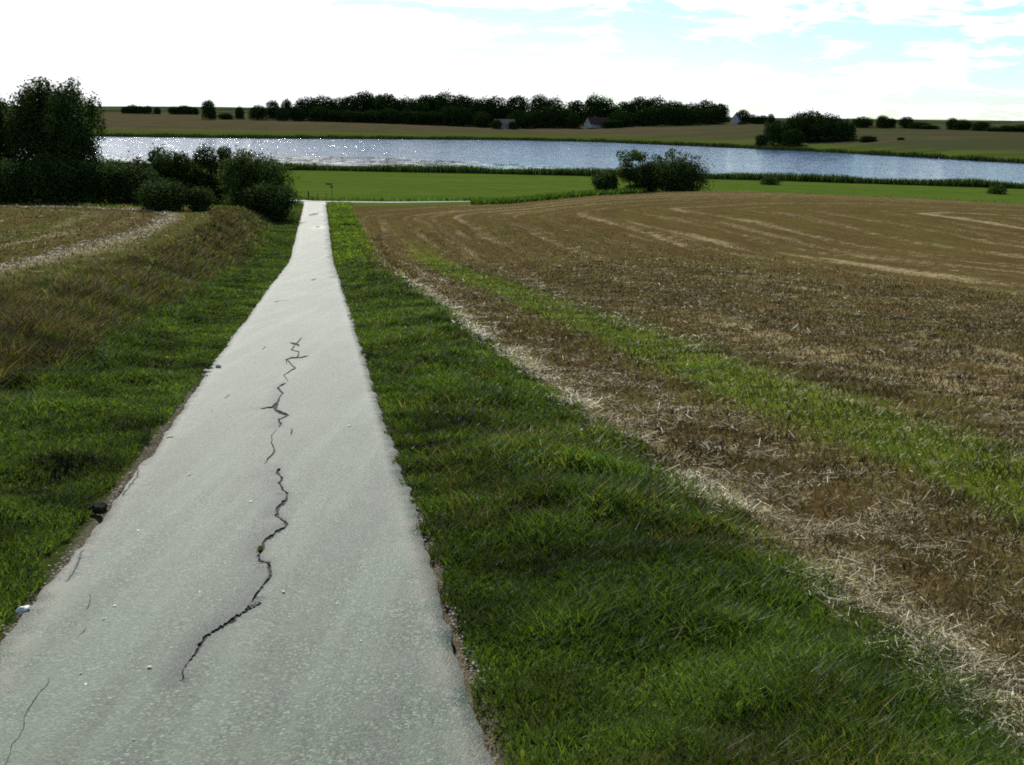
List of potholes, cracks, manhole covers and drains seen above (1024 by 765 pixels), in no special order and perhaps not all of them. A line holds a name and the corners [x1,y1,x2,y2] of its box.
crack [5,679,49,765]
crack [182,338,309,680]
